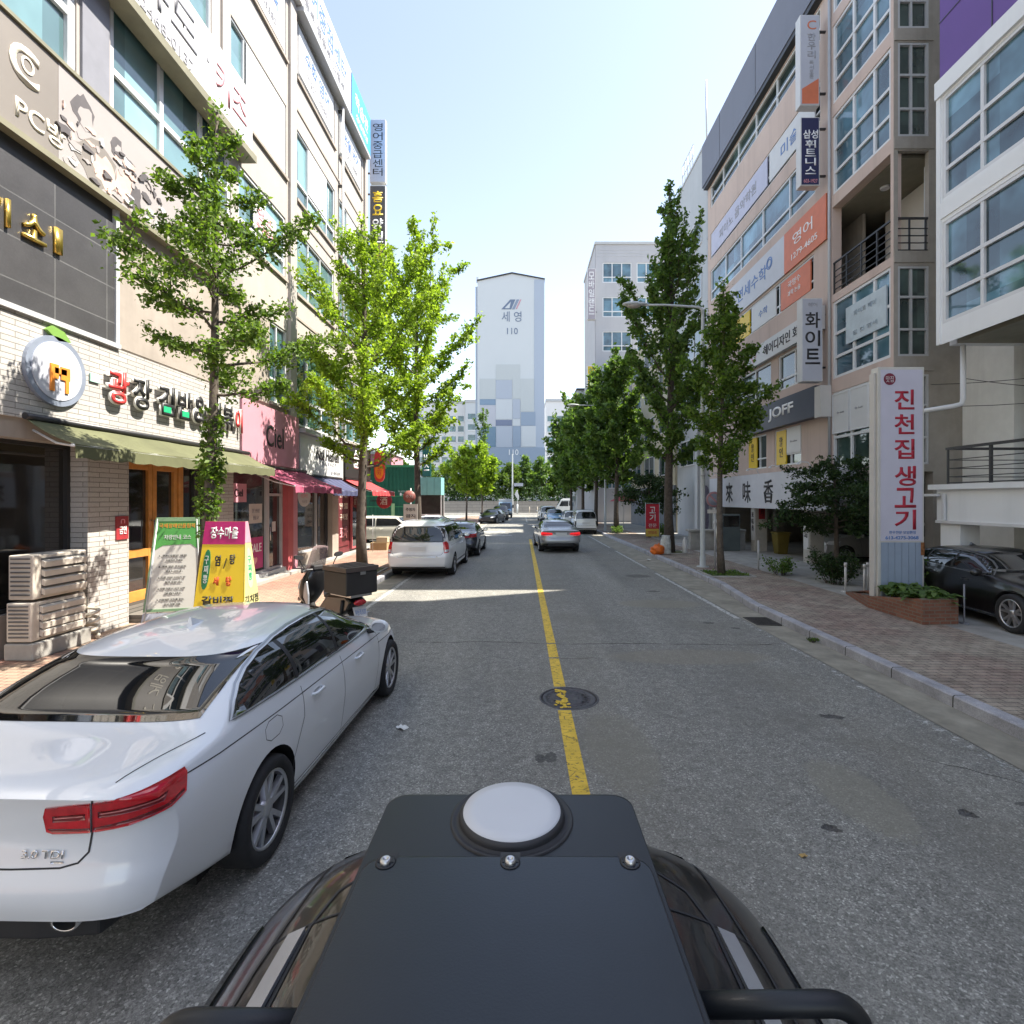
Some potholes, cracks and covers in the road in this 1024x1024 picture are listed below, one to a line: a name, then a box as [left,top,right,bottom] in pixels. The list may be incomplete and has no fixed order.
manhole cover [539,687,599,710]
pothole [821,824,843,833]
pothole [957,809,980,818]
drain grate [743,617,782,626]
